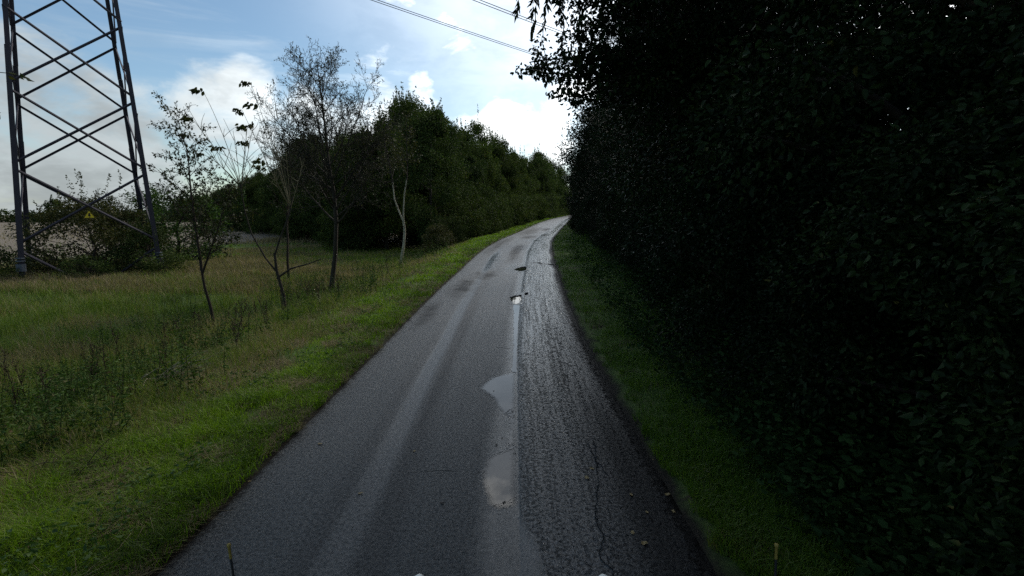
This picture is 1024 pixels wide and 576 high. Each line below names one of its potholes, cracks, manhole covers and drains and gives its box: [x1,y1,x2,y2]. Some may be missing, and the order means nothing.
pothole [506,294,526,305]
crack [586,440,614,576]
